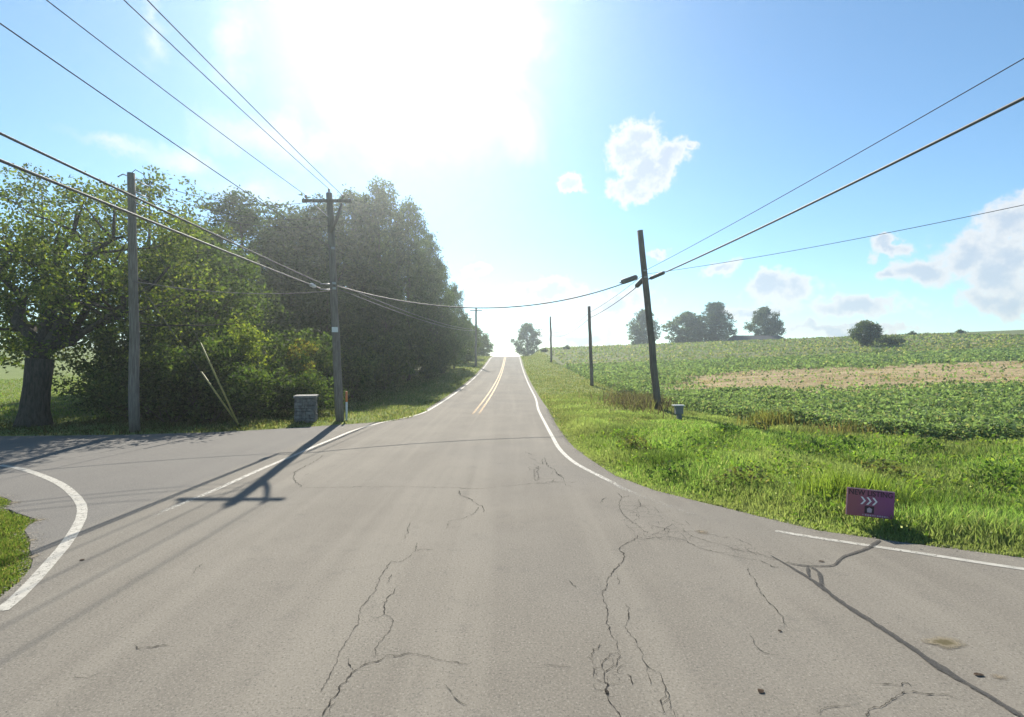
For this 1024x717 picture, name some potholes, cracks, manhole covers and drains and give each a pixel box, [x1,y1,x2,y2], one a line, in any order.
crack [321,524,465,716]
crack [588,495,812,717]
crack [865,682,951,716]
crack [293,457,567,529]
